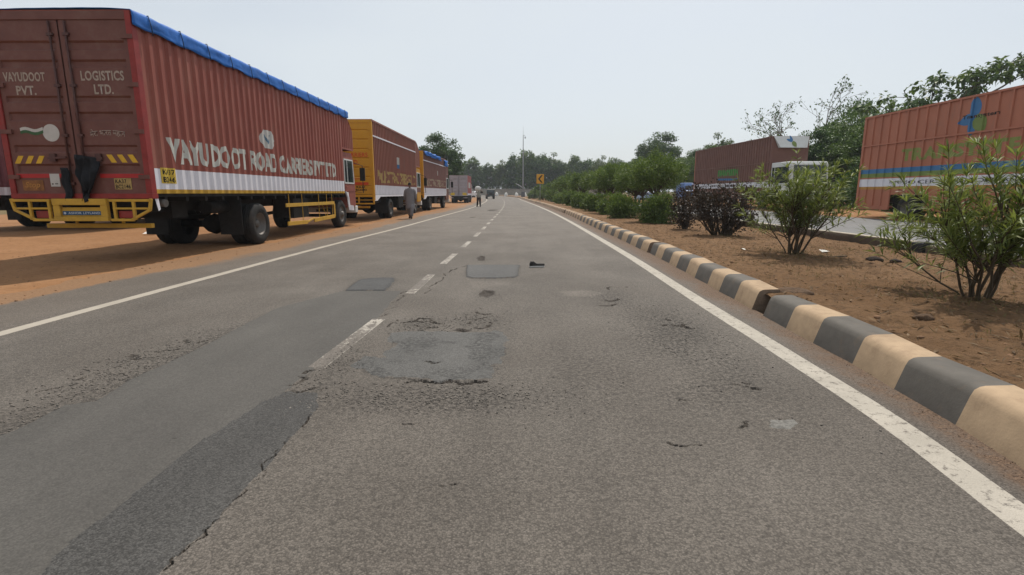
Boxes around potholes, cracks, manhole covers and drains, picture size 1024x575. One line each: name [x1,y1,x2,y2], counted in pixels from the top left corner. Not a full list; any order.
crack [386,318,439,329]
